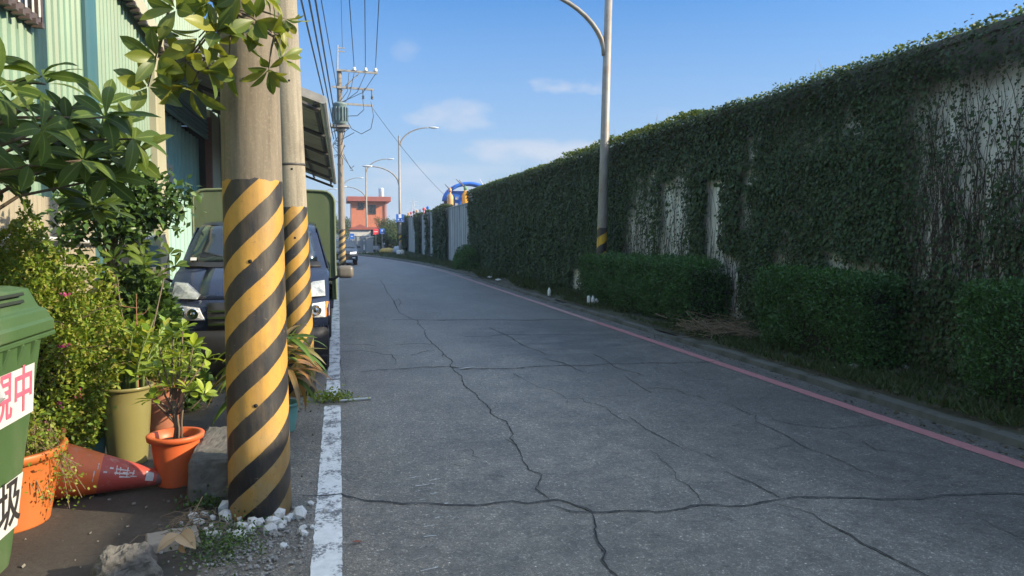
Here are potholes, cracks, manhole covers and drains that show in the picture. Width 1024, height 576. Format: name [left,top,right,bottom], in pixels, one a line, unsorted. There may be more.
crack [308,285,1024,576]
